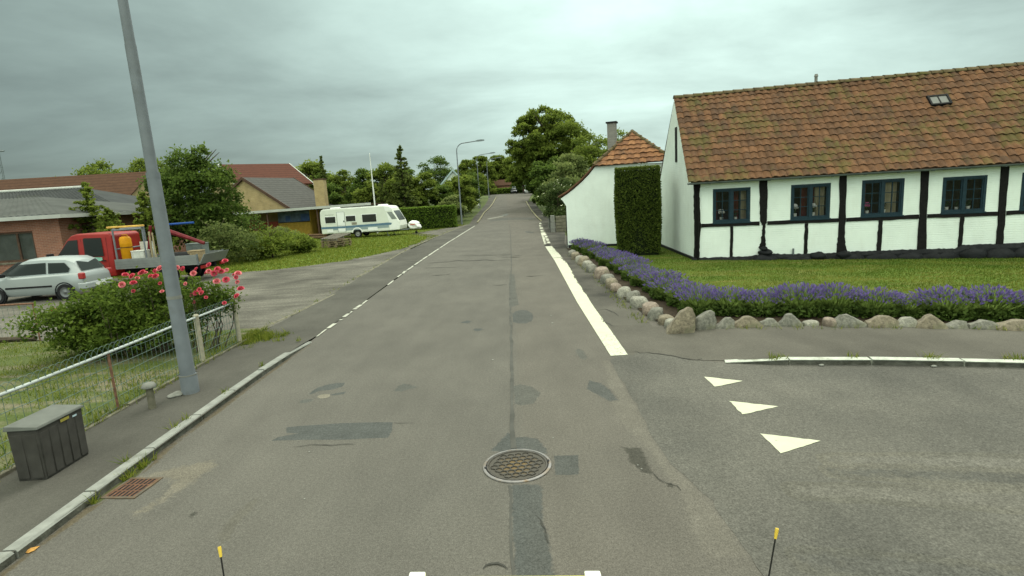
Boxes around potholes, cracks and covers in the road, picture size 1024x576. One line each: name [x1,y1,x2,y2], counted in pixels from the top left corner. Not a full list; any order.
manhole cover [483,449,551,483]
drain grate [100,477,163,499]
